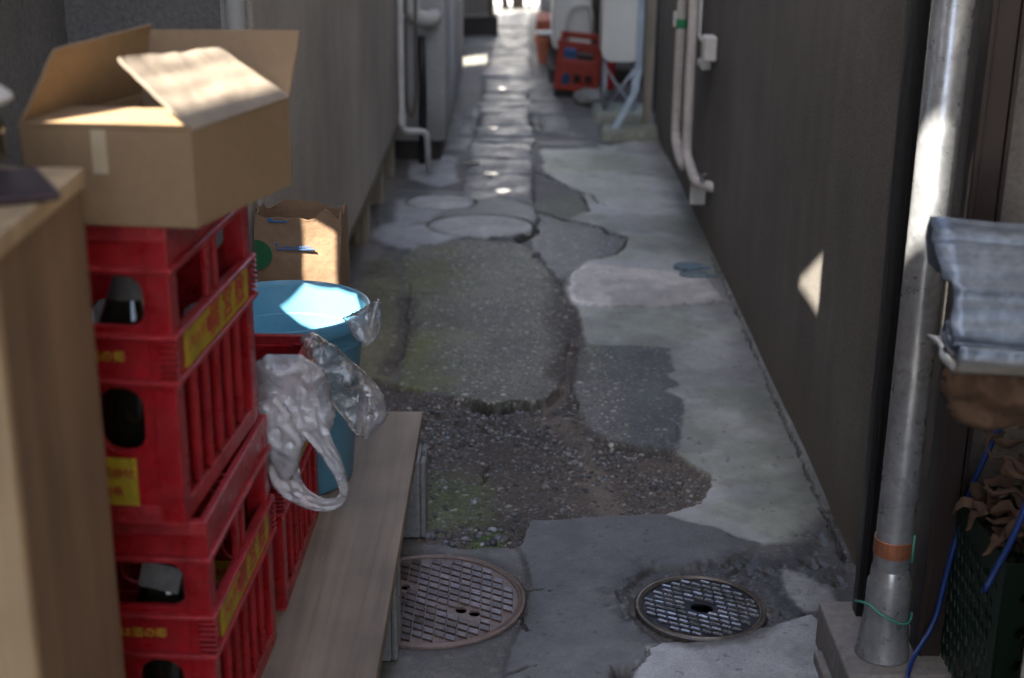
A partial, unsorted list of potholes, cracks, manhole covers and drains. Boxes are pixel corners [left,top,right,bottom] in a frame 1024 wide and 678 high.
manhole cover [399,554,526,650]
manhole cover [635,575,767,643]
pothole [370,343,713,551]
